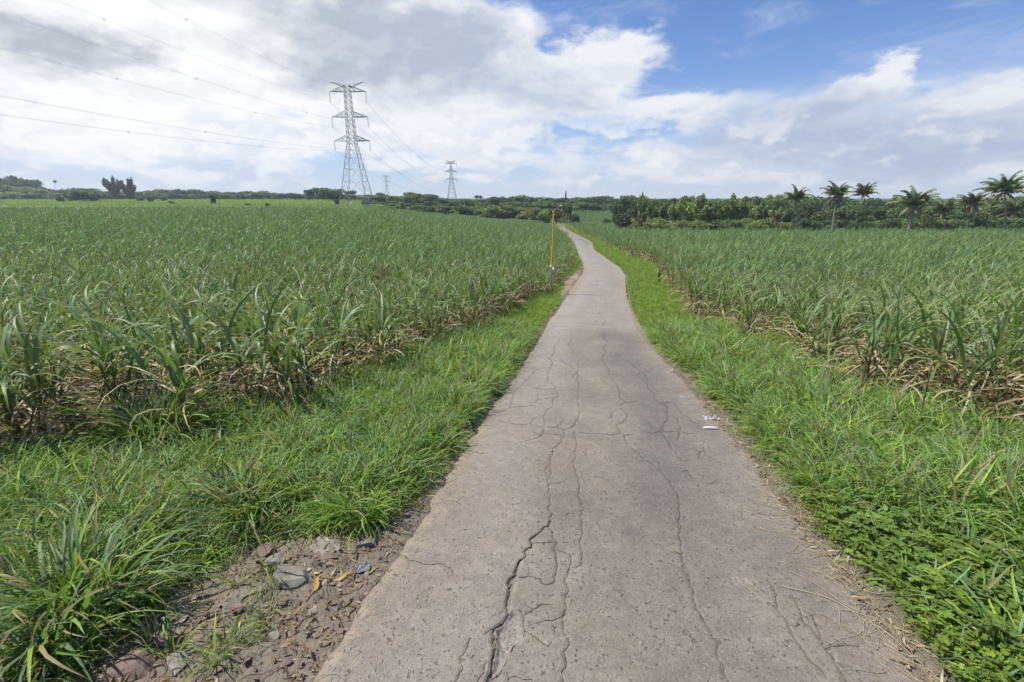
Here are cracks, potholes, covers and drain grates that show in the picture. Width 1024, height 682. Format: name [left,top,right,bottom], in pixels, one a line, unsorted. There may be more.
crack [770,584,852,681]
crack [456,333,729,682]
